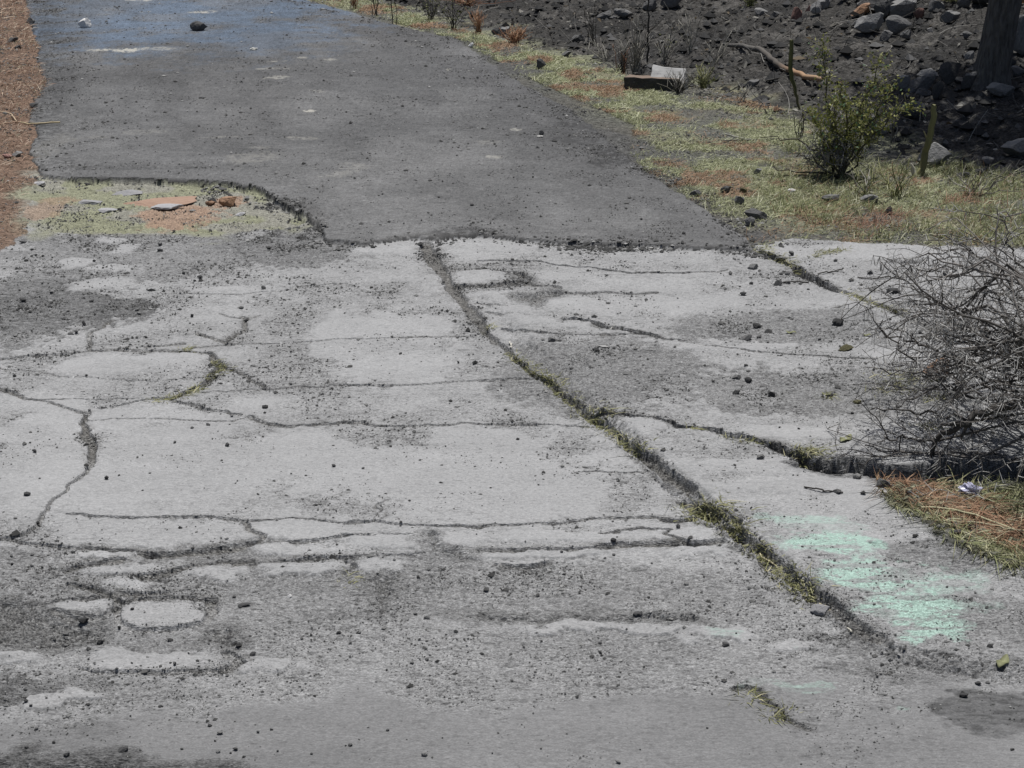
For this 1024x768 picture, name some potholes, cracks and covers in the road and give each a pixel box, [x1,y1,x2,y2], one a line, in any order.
pothole [24,173,310,235]
crack [756,250,944,332]
crack [0,241,887,676]
